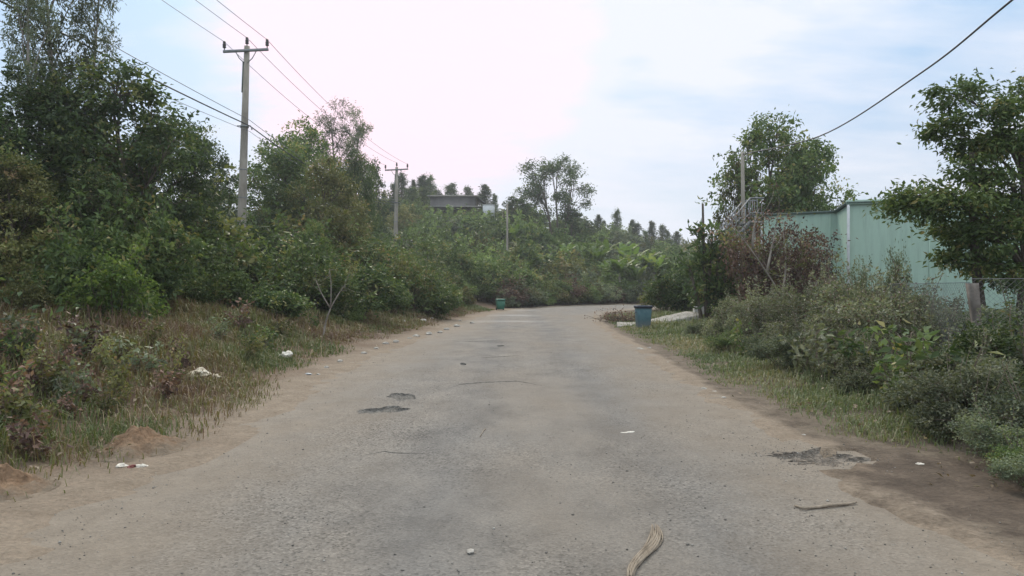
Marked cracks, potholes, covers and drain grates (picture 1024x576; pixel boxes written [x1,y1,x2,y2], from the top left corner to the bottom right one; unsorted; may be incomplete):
pothole [765,448,871,467]
pothole [387,393,416,401]
crack [448,381,542,389]
pothole [357,406,410,414]
